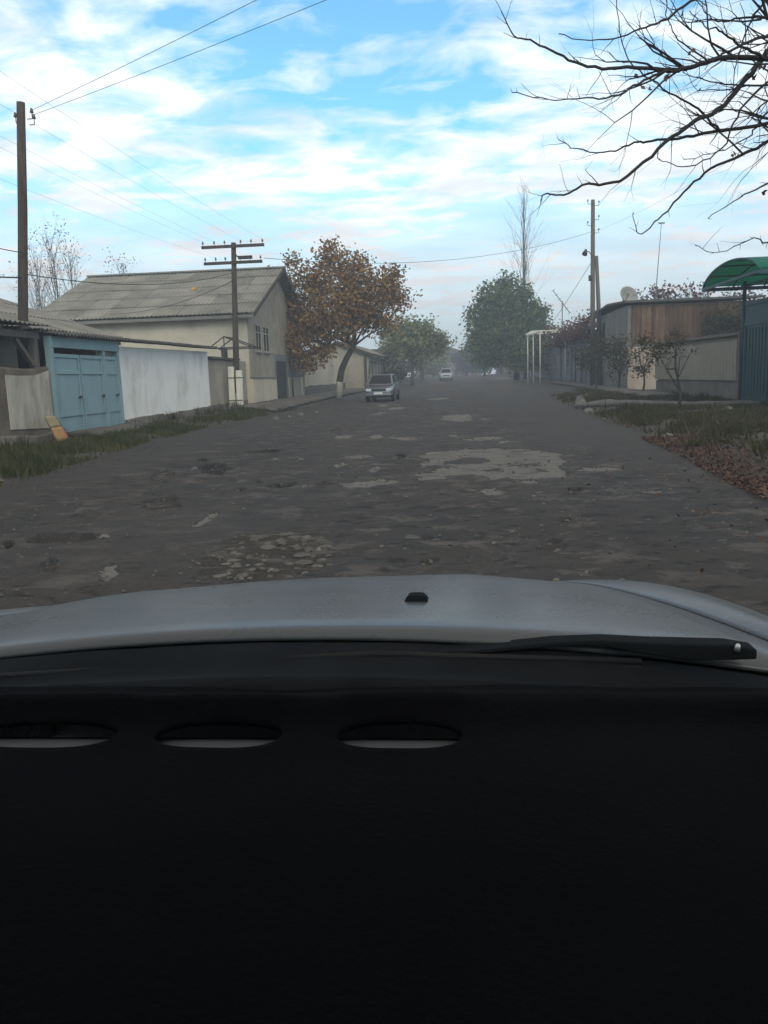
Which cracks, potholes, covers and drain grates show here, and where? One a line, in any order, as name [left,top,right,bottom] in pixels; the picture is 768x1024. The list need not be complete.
pothole [35,556,61,575]
pothole [179,530,340,584]
pothole [140,494,183,511]
pothole [19,532,102,544]
pothole [196,462,234,475]
